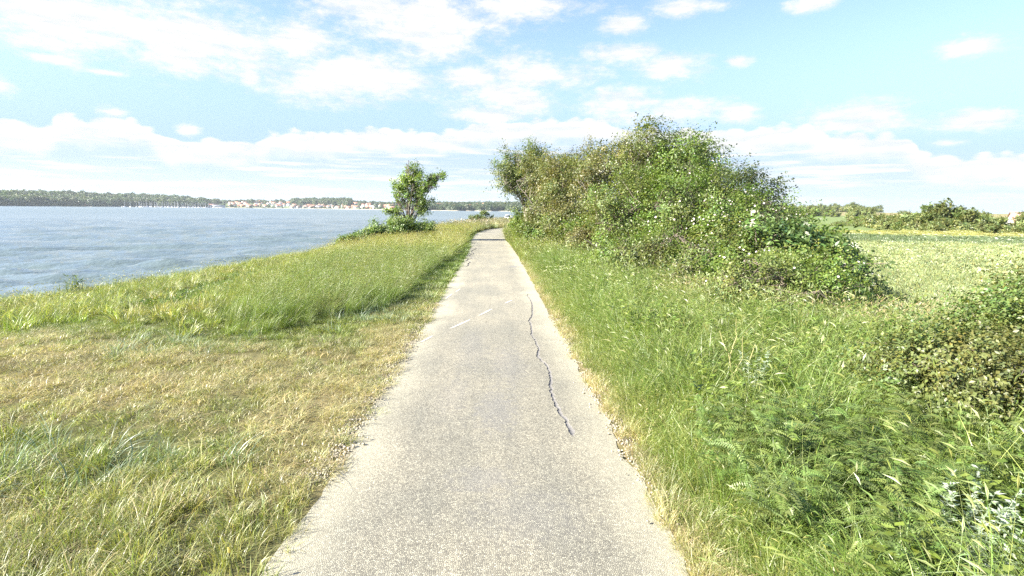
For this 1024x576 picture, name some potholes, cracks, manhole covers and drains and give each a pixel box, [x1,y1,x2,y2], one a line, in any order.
crack [527,294,575,436]
